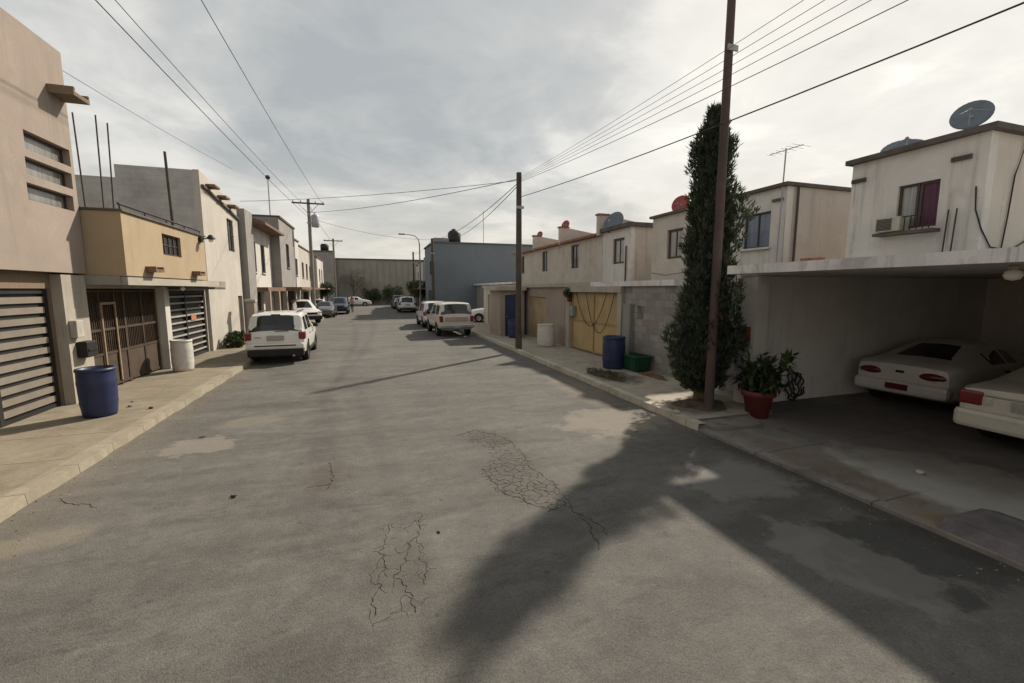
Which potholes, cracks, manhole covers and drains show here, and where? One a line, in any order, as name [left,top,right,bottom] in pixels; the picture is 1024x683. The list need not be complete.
crack [456,429,608,550]
